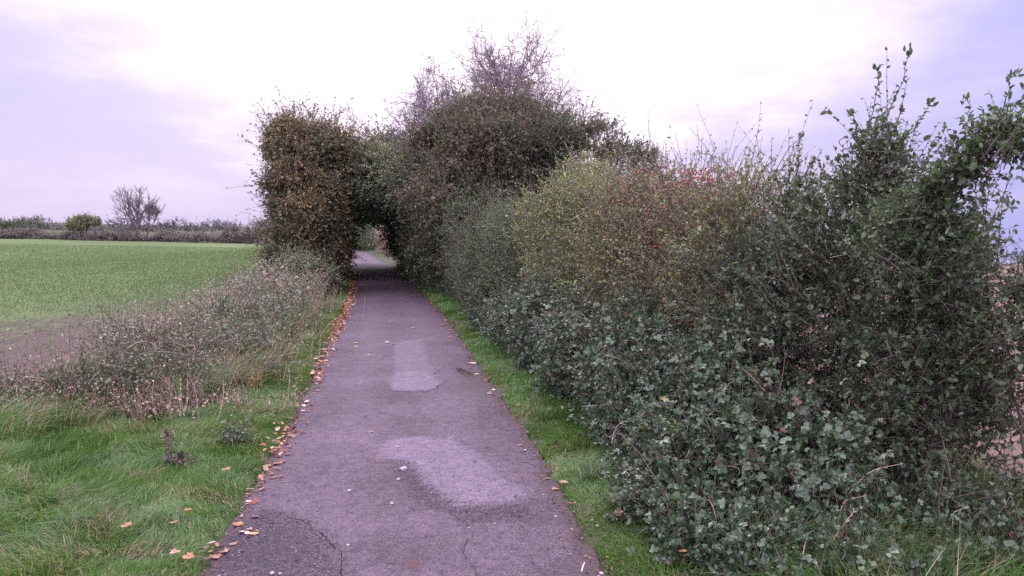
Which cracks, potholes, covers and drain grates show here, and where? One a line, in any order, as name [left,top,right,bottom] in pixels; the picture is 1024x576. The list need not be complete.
crack [448,511,482,576]
crack [279,512,347,576]
